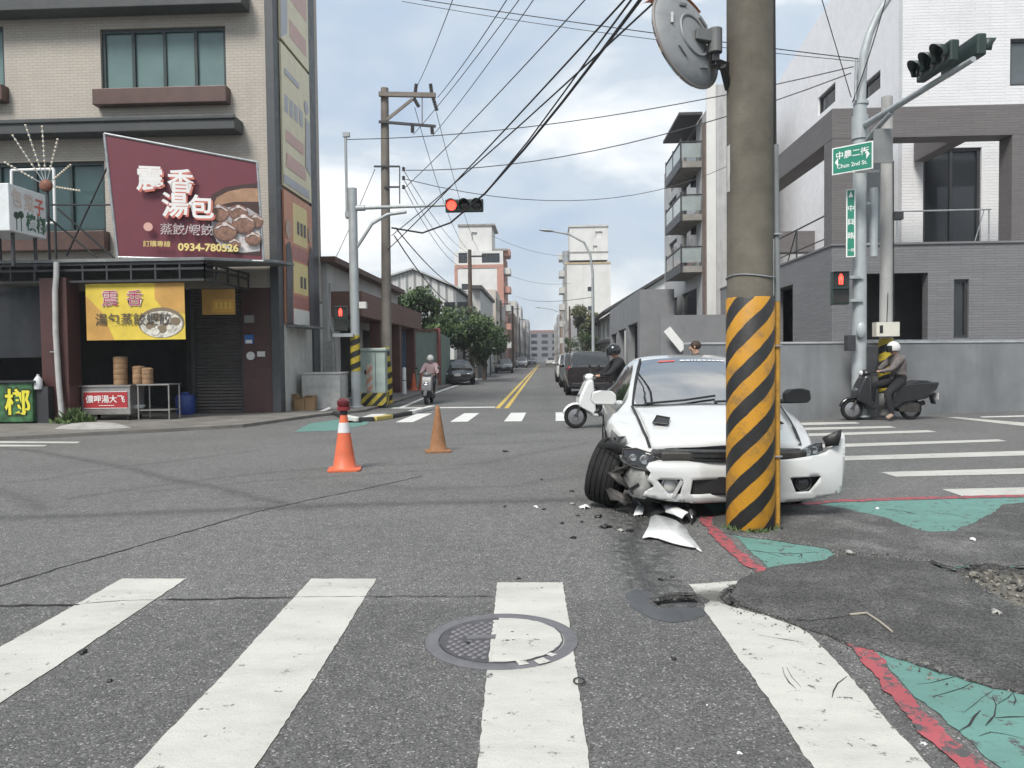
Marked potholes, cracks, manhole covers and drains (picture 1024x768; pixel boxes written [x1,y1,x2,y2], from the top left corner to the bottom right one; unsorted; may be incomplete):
pothole [950,564,1024,606]
crack [921,676,1024,738]
manhole cover [425,614,578,671]
pothole [647,592,710,608]
